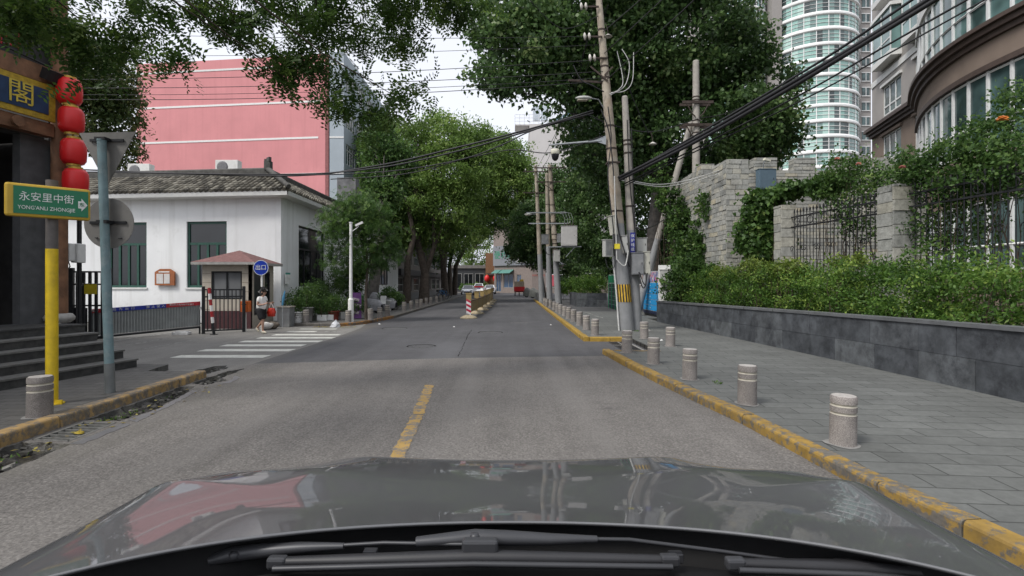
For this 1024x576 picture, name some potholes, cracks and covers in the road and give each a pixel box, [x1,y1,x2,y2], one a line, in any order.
drain grate [33,422,115,442]
